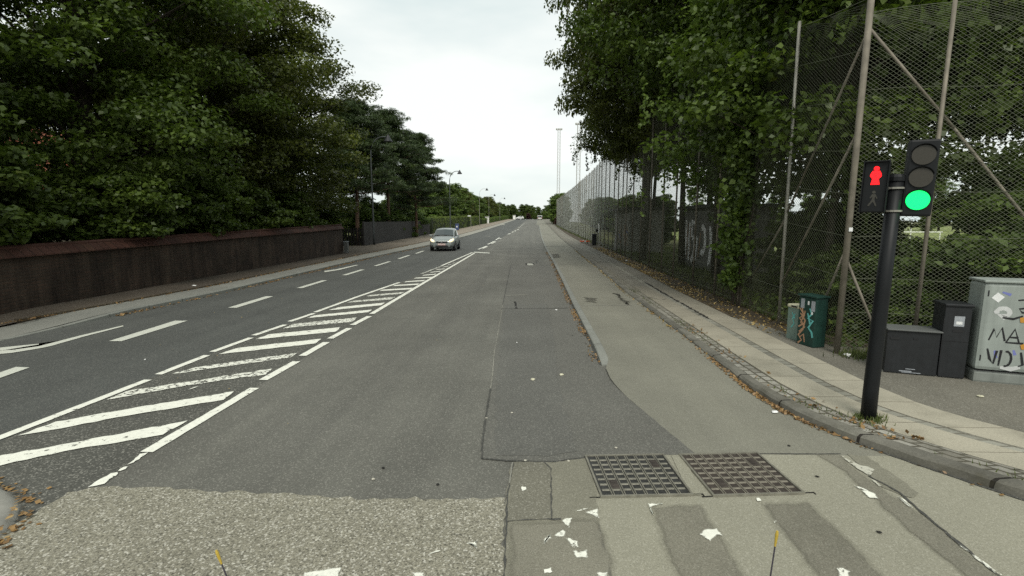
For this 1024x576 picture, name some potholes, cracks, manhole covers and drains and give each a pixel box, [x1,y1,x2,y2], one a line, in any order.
crack [868,475,1000,576]
